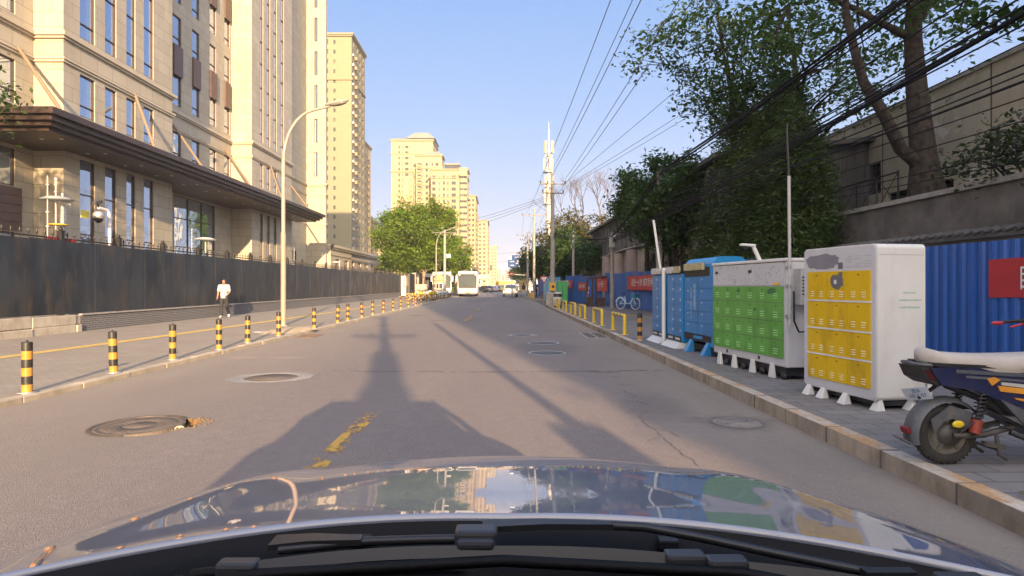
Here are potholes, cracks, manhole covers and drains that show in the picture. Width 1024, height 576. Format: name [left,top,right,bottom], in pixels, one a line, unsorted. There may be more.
manhole cover [85,415,187,437]
manhole cover [709,416,766,429]
manhole cover [225,372,314,383]
pothole [171,417,213,431]
